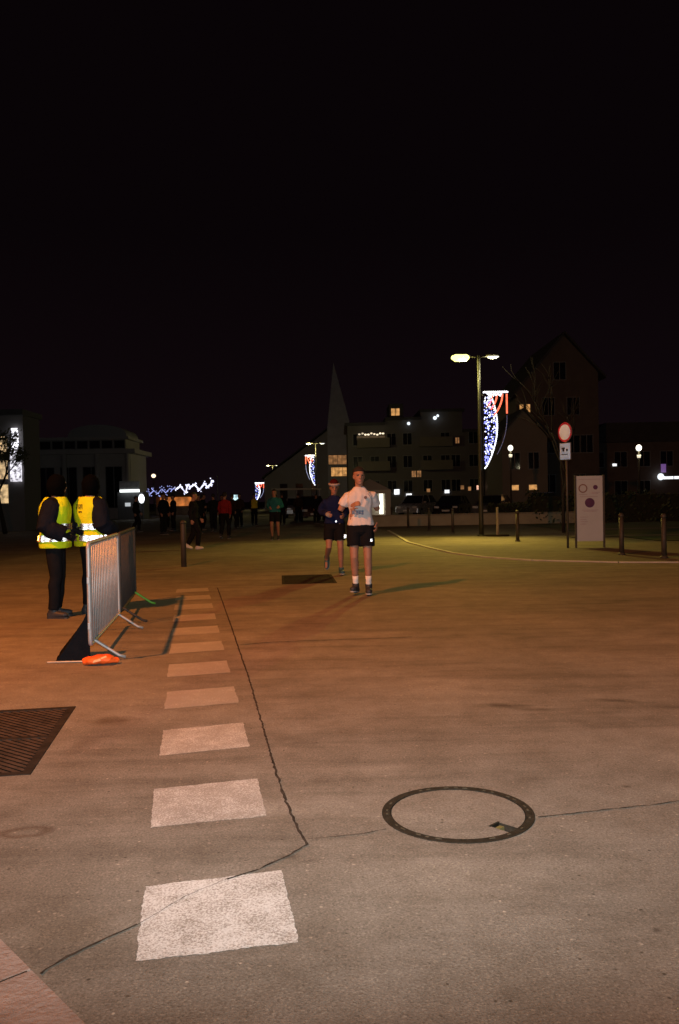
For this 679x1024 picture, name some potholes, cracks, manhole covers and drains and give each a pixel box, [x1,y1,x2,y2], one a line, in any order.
crack [40,589,398,974]
crack [538,800,679,817]
drain grate [0,706,76,777]
manhole cover [382,786,535,844]
